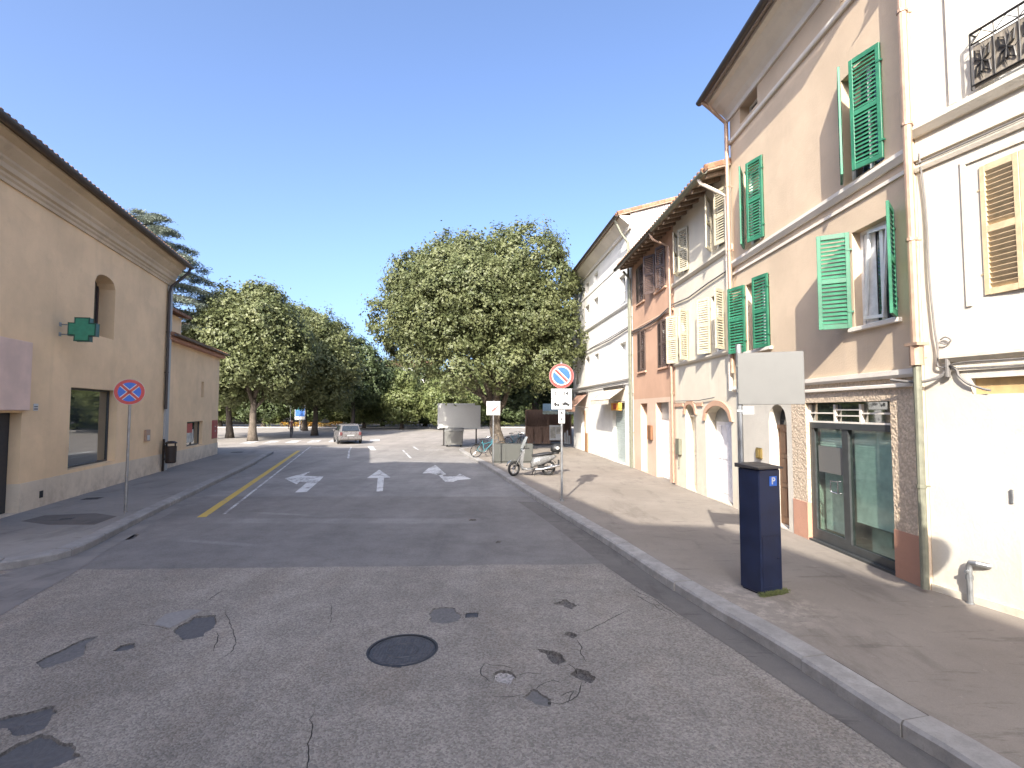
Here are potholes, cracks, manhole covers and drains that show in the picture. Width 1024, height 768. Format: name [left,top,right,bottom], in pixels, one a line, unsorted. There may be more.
pothole [570,668,598,683]
pothole [0,734,80,768]
pothole [174,615,217,640]
pothole [493,669,517,685]
pothole [113,643,136,652]
manhole cover [366,634,438,668]
pothole [554,599,579,611]
crack [306,605,332,768]
pothole [523,689,551,707]
pothole [0,705,58,736]
crack [137,593,236,661]
crack [480,613,622,705]
